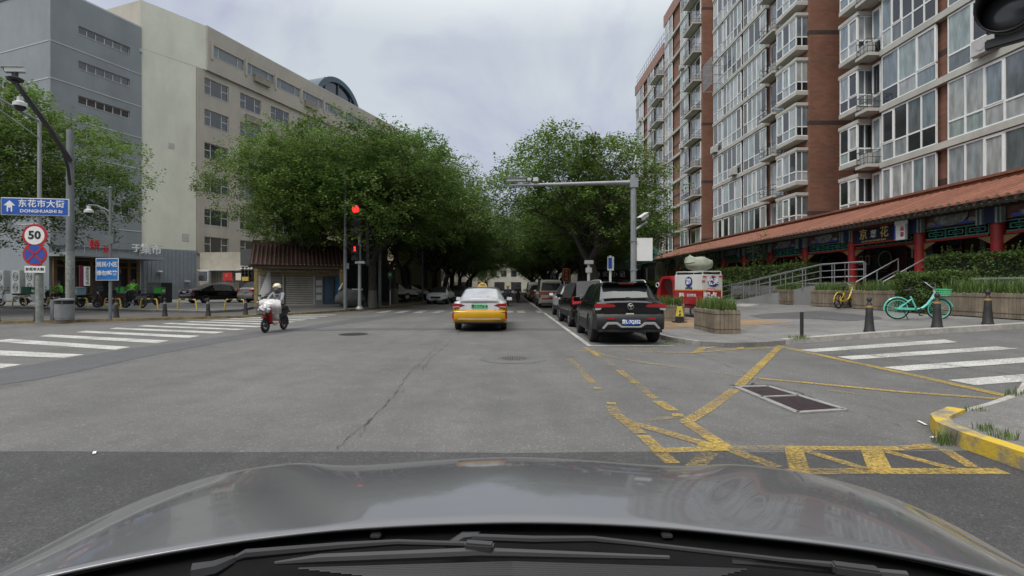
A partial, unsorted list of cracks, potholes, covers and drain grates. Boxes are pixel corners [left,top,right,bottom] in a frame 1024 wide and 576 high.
crack [337,340,451,448]
manhole cover [480,354,547,363]
